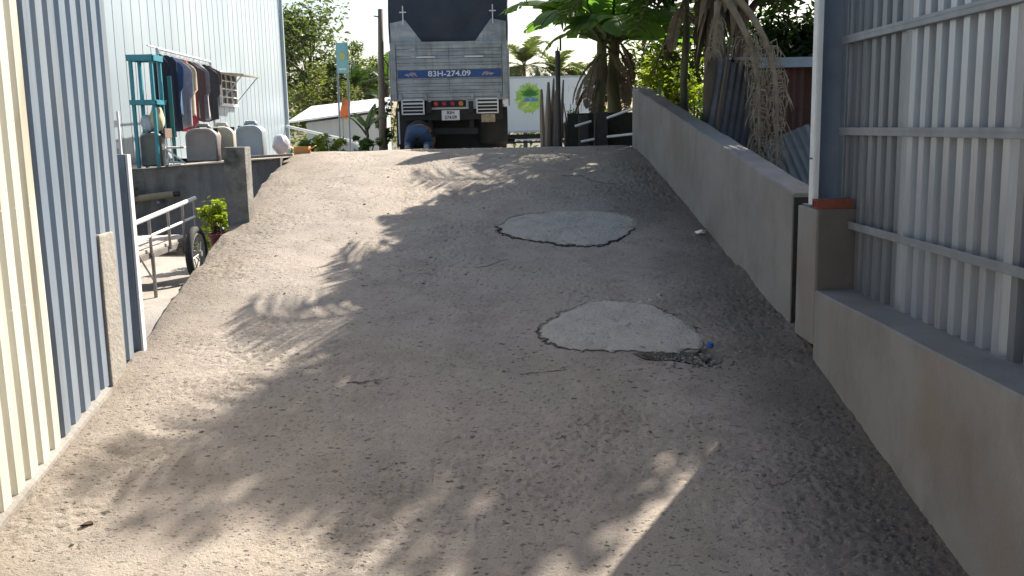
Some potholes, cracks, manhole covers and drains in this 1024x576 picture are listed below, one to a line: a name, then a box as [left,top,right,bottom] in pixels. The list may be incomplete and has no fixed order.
pothole [633,347,723,366]
